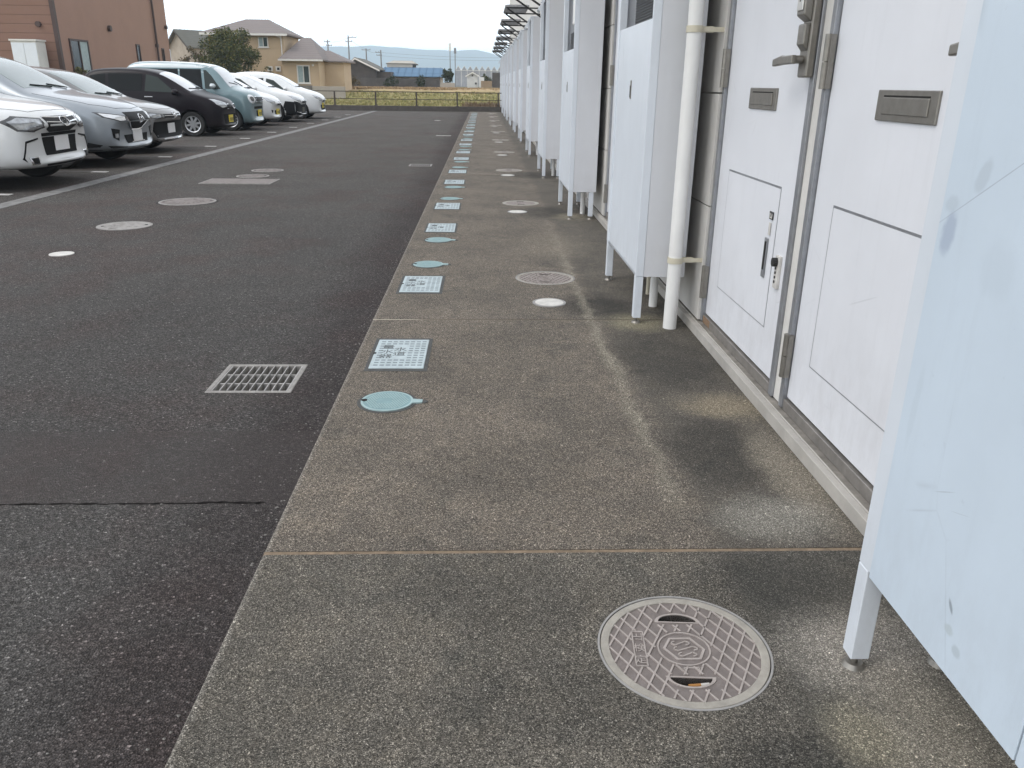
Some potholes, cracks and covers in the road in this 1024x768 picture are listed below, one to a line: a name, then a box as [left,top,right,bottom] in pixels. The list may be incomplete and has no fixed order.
manhole cover [515,271,575,285]
utility cover [357,391,428,413]
drain grate [205,364,308,393]
manhole cover [156,198,219,206]
manhole cover [96,221,153,230]
manhole cover [597,596,774,711]
